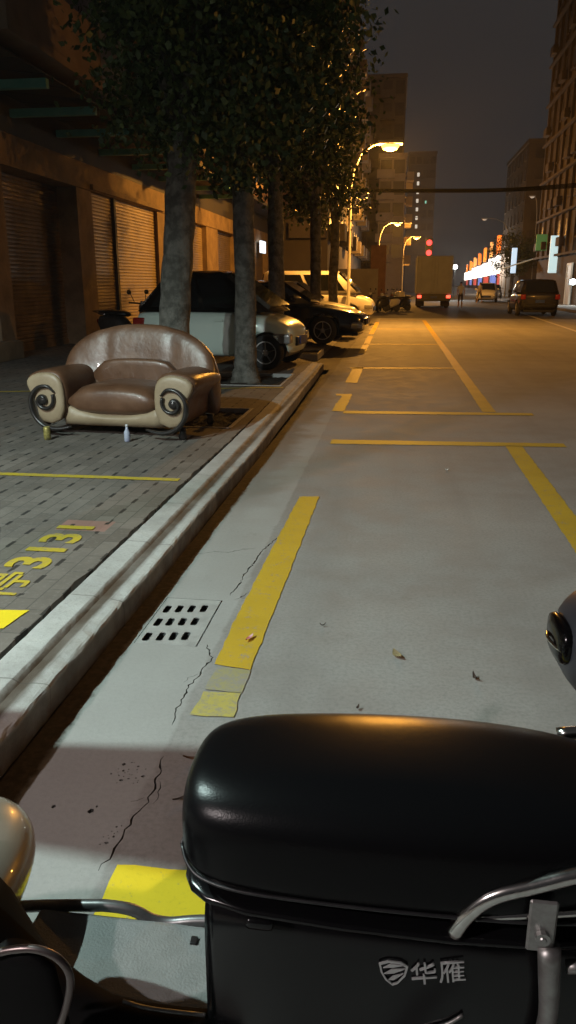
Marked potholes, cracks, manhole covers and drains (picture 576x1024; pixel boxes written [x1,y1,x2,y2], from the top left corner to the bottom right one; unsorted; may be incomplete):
crack [98,756,164,871]
crack [198,538,277,598]
crack [172,645,213,724]
